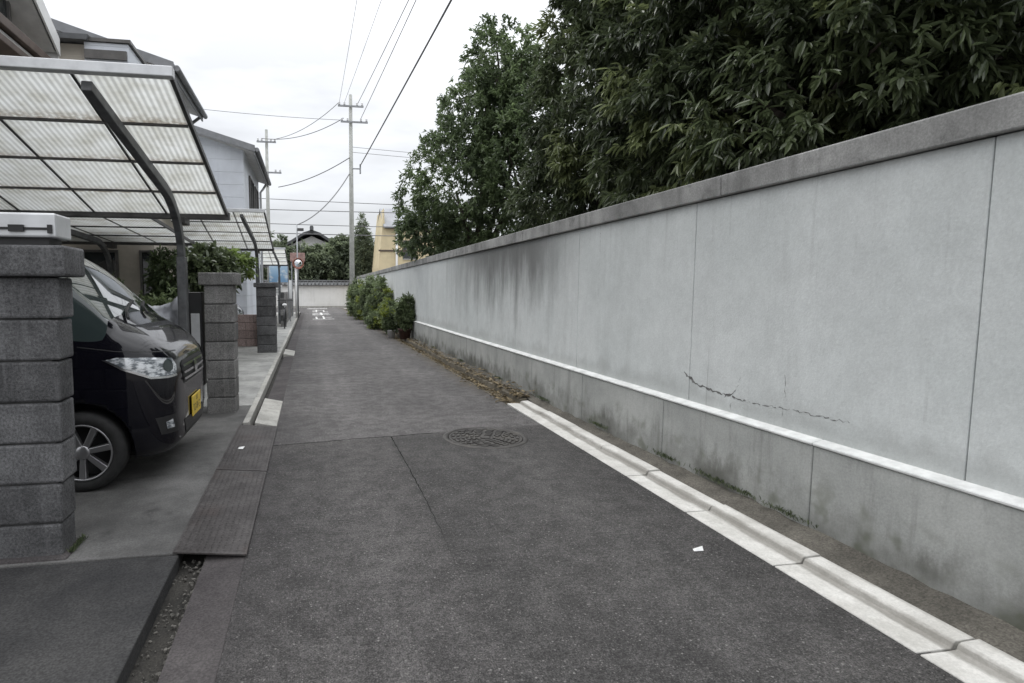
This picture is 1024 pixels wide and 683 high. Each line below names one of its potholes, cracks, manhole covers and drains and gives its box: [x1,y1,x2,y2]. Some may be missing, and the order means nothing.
manhole cover [443,427,528,449]
